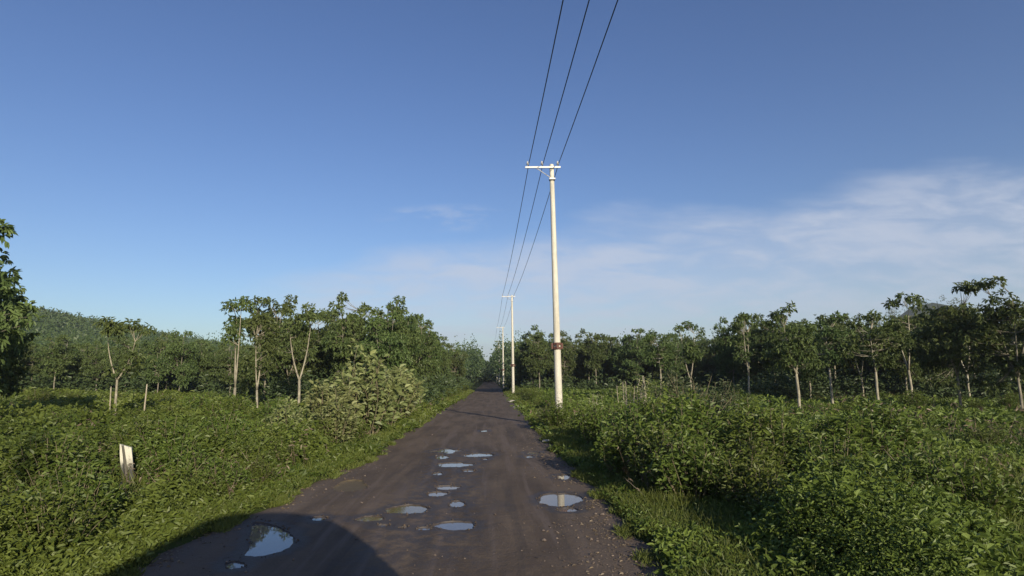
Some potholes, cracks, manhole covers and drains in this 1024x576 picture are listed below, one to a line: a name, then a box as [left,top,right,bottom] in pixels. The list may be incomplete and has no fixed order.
pothole [448,499,467,508]
pothole [240,518,299,558]
pothole [225,560,247,569]
pothole [384,503,431,514]
pothole [536,491,587,507]
pothole [354,514,386,522]
pothole [429,519,477,530]
